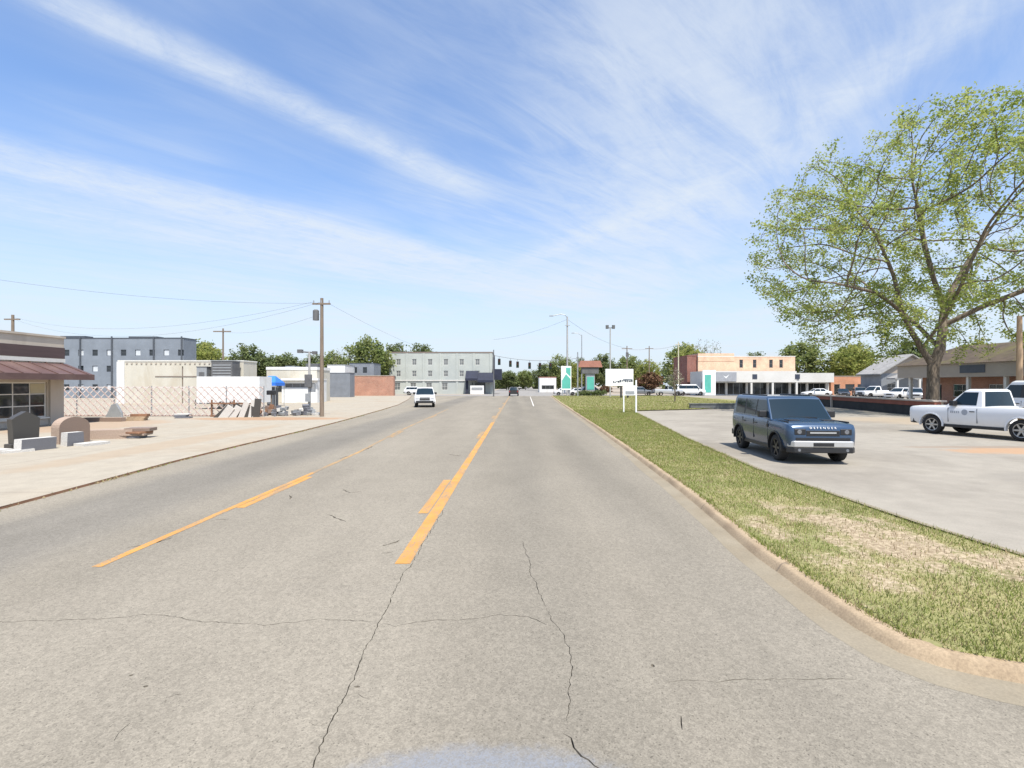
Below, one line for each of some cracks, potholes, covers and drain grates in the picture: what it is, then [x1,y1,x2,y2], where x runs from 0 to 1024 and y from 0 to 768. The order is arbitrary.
crack [311,510,599,768]
crack [0,614,369,626]
